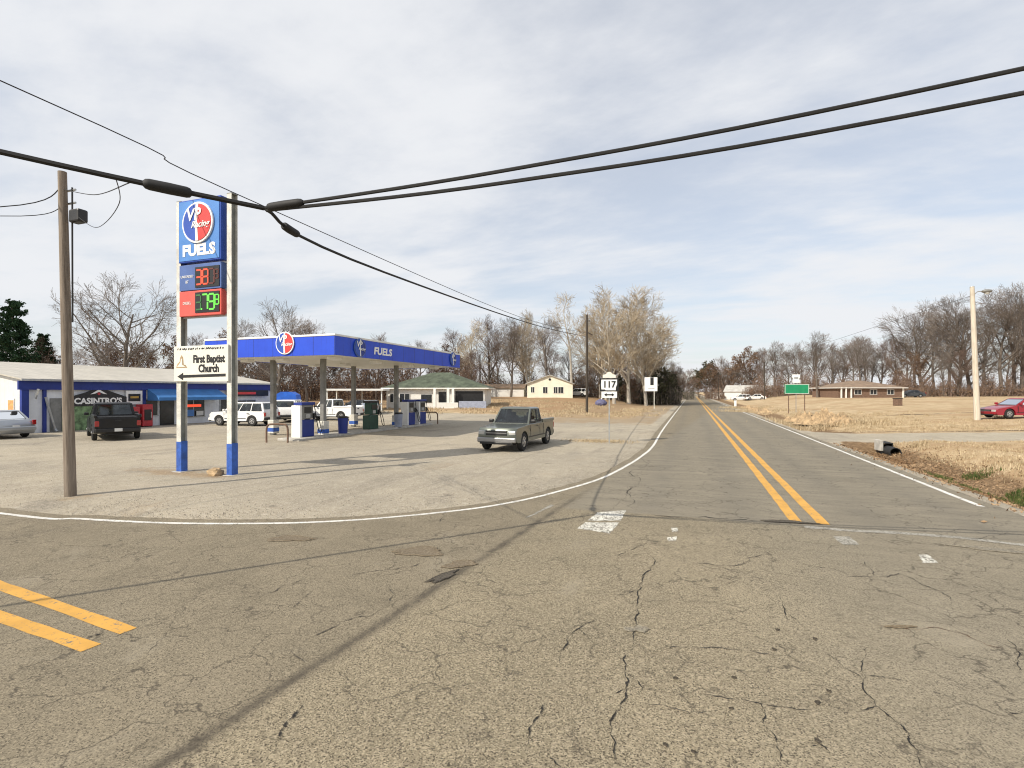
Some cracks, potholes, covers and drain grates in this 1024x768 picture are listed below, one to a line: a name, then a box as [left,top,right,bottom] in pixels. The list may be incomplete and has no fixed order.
crack [604,540,656,768]
pothole [425,569,459,583]
crack [278,704,304,738]
